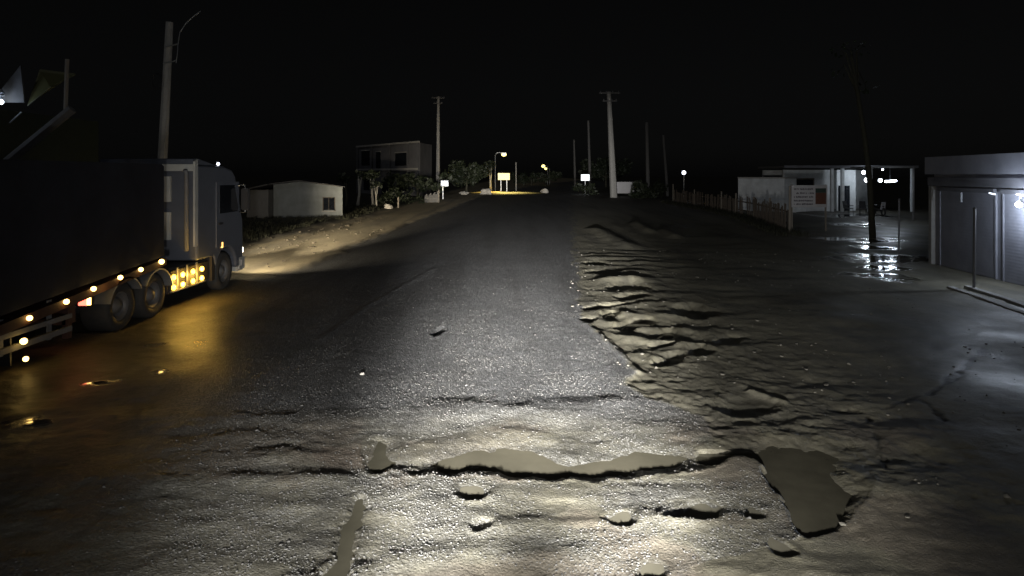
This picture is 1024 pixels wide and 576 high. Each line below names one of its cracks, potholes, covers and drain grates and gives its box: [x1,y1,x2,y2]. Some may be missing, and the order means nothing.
pothole [693,434,874,538]
pothole [391,428,716,483]
pothole [470,516,494,532]
pothole [360,434,401,474]
pothole [600,508,639,526]
pothole [317,493,374,576]
pothole [455,481,491,500]
pothole [634,558,669,576]
